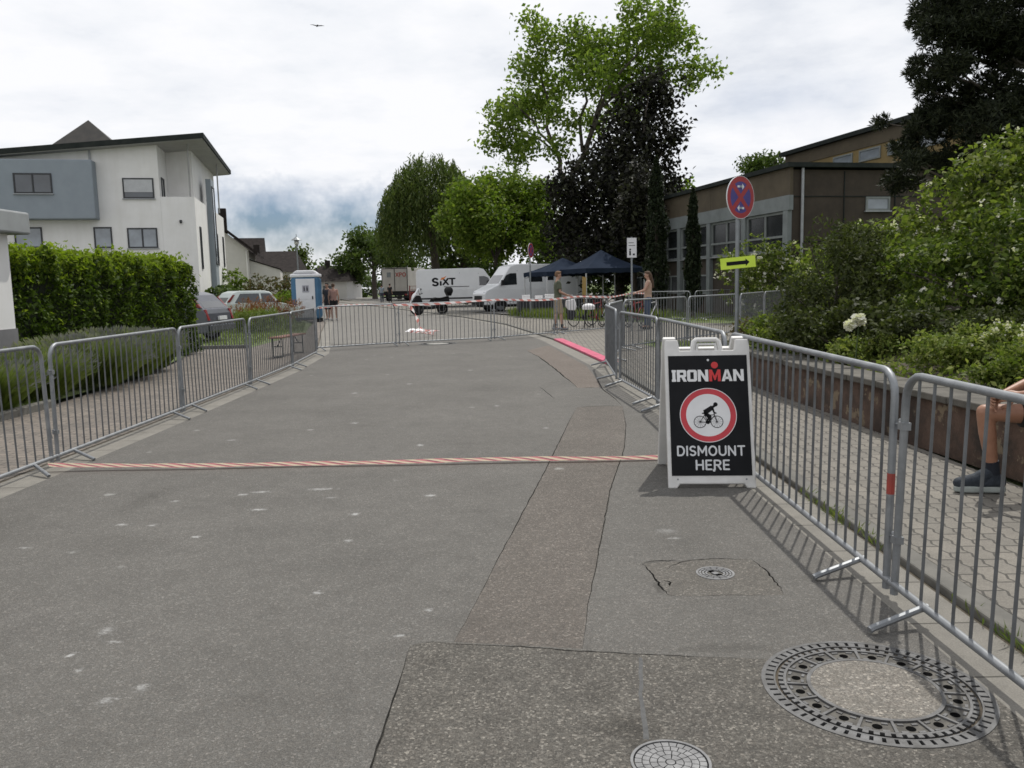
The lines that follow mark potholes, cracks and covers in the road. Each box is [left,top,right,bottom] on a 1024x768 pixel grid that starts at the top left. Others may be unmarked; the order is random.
manhole cover [696,566,735,580]
crack [642,558,783,596]
manhole cover [761,641,1000,749]
manhole cover [630,739,712,768]
